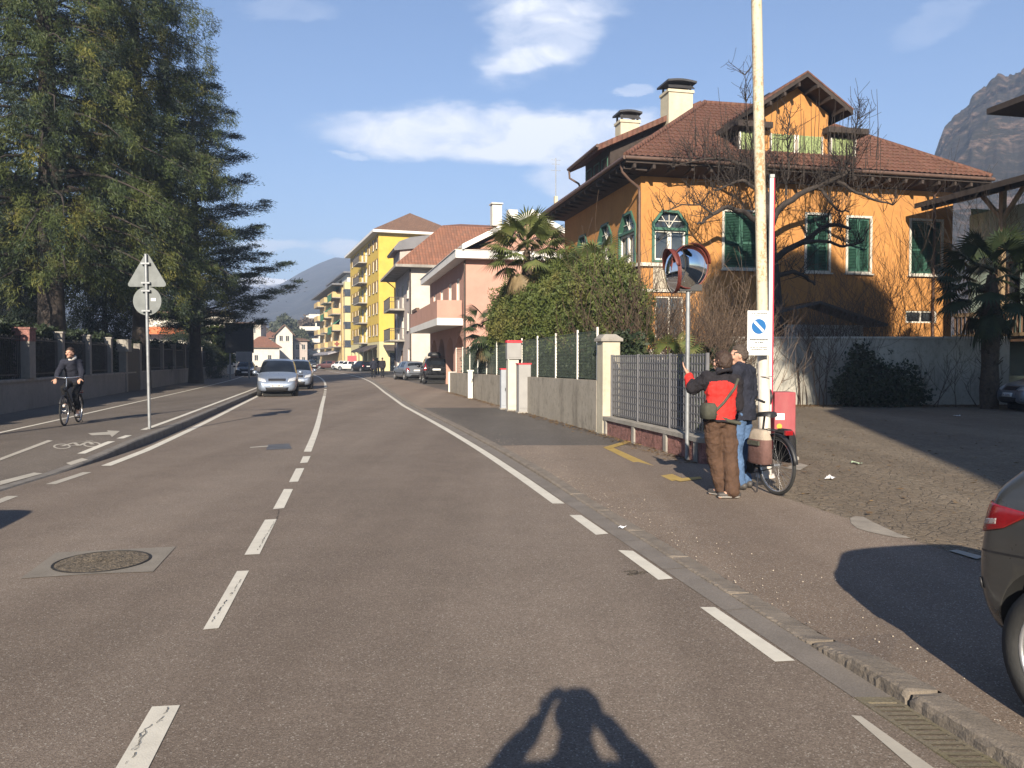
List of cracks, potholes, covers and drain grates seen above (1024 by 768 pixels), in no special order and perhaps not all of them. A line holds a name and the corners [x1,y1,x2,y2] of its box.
drain grate [854,697,1006,768]
manhole cover [51,550,152,573]
